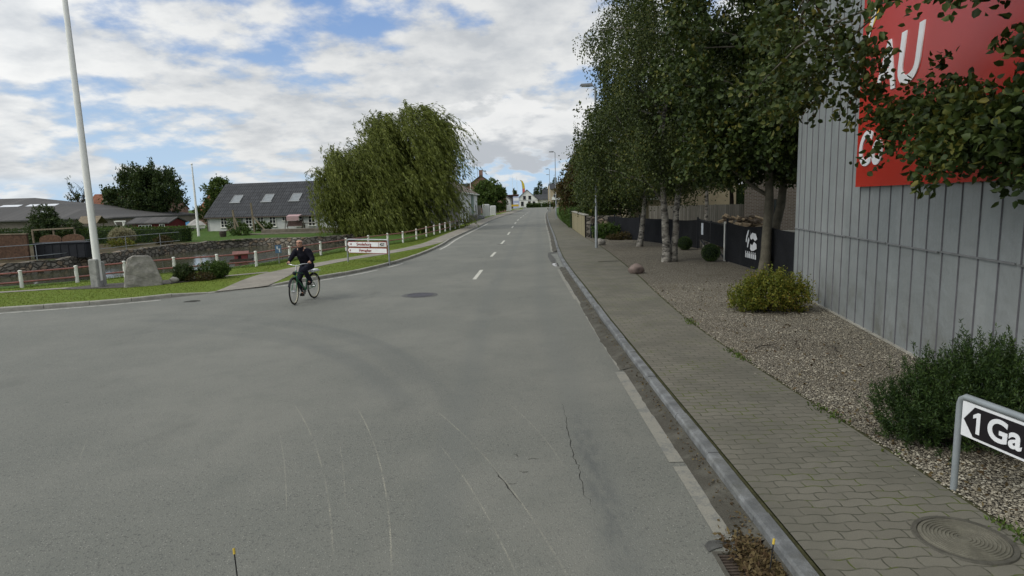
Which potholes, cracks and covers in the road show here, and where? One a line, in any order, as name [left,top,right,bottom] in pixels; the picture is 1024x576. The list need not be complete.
drain grate [712,550,764,576]
manhole cover [910,516,1021,566]
crack [562,404,595,511]
